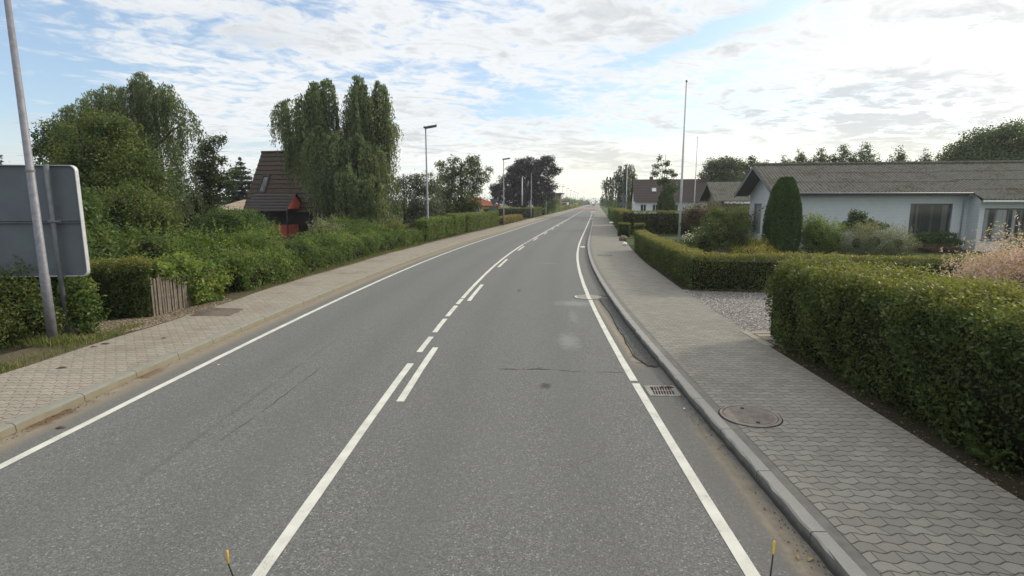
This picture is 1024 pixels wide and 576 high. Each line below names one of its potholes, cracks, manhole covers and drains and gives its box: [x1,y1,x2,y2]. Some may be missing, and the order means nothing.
manhole cover [718,405,783,428]
drain grate [643,385,682,397]
